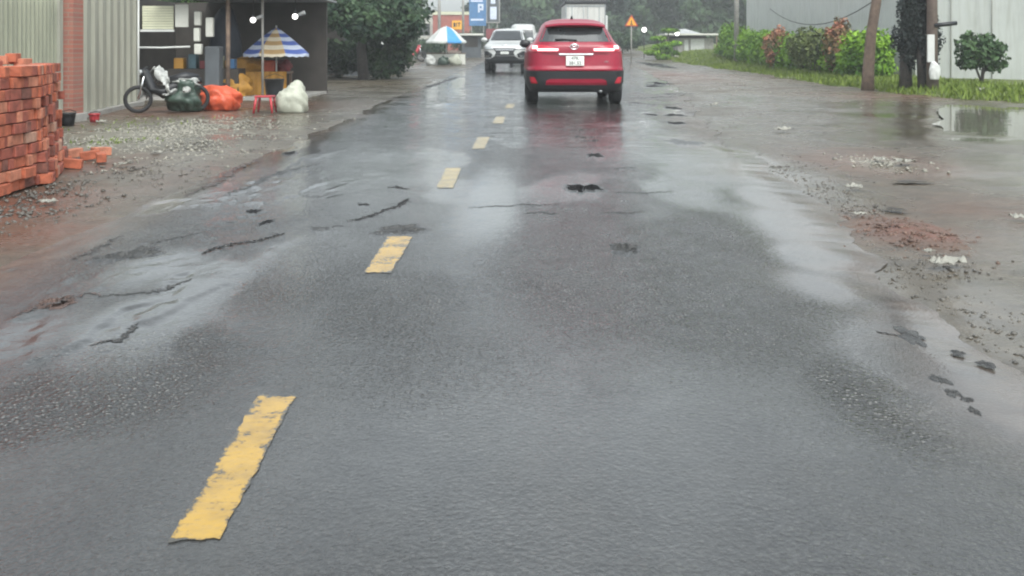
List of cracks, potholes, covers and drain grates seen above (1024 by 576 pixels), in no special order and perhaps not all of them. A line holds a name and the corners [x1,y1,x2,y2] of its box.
pothole [927,374,954,385]
crack [91,322,138,345]
pothole [893,325,927,347]
pothole [610,243,642,256]
pothole [944,389,962,399]
crack [12,278,192,317]
pothole [33,295,77,310]
crack [150,230,285,254]
pothole [562,184,609,195]
pothole [368,224,432,236]
crack [326,185,414,227]
